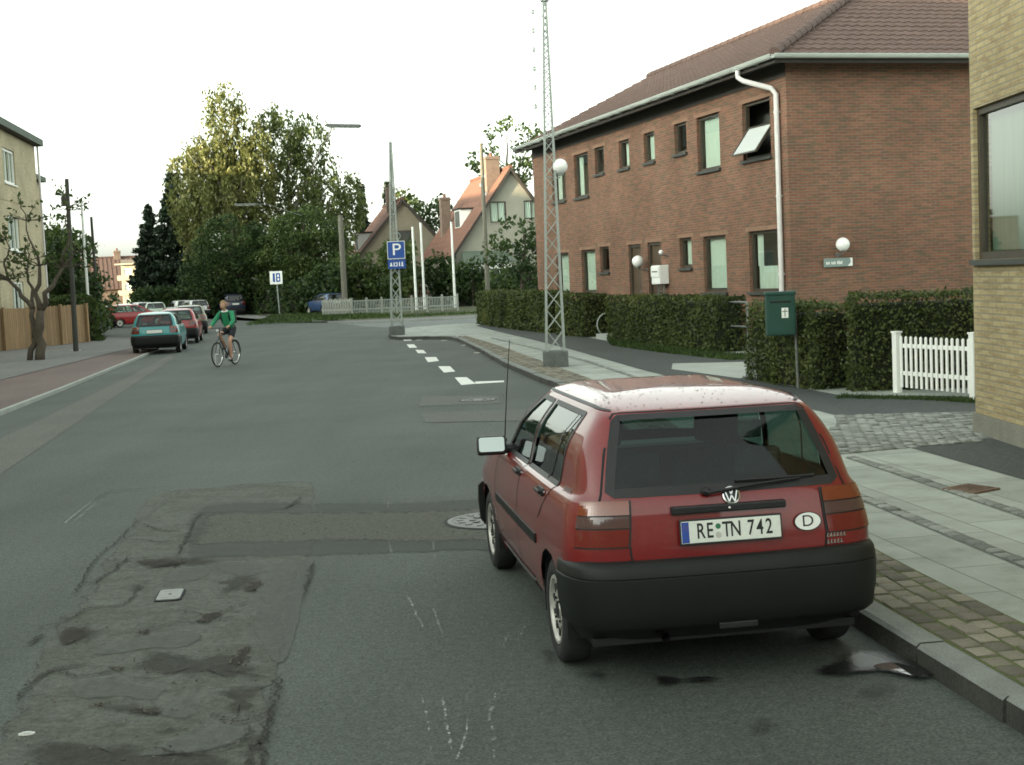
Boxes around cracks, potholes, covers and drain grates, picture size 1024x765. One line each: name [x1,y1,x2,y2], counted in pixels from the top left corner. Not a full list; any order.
crack [29,497,302,644]
crack [17,663,112,701]
crack [148,674,283,765]
utility cover [154,588,186,602]
crack [302,562,315,596]
manhole cover [444,512,486,529]
